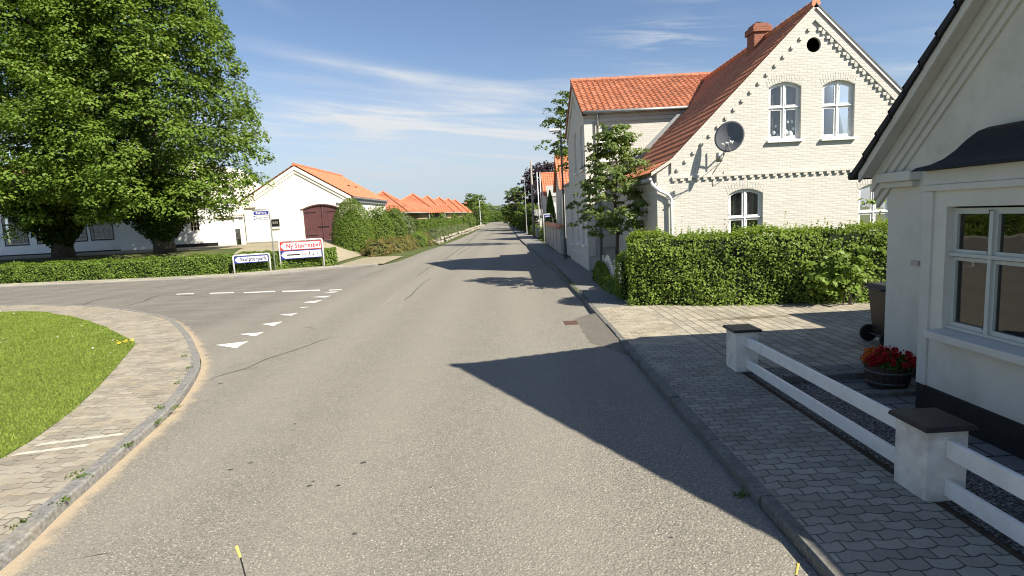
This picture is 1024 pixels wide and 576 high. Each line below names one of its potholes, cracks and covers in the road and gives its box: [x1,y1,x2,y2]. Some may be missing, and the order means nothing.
crack [212,327,332,379]
